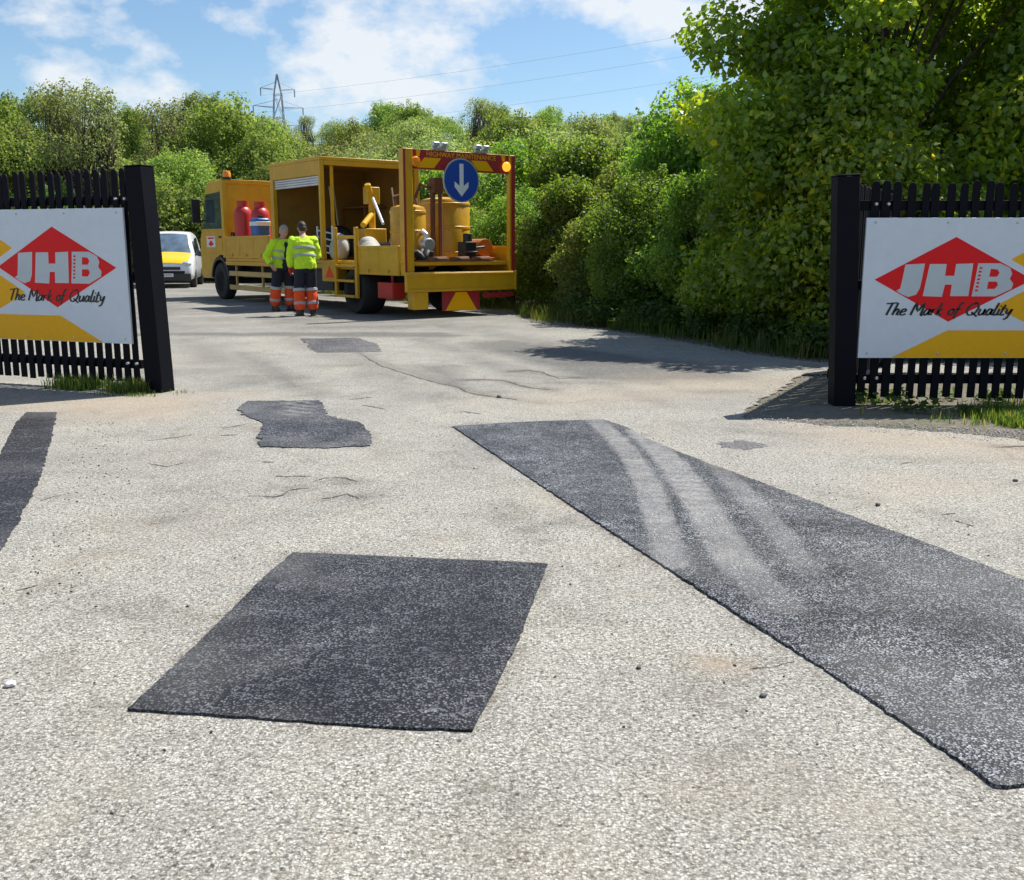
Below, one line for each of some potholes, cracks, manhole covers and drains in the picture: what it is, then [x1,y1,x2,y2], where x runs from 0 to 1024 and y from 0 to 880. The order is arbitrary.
crack [262,461,359,499]
crack [364,355,578,414]
